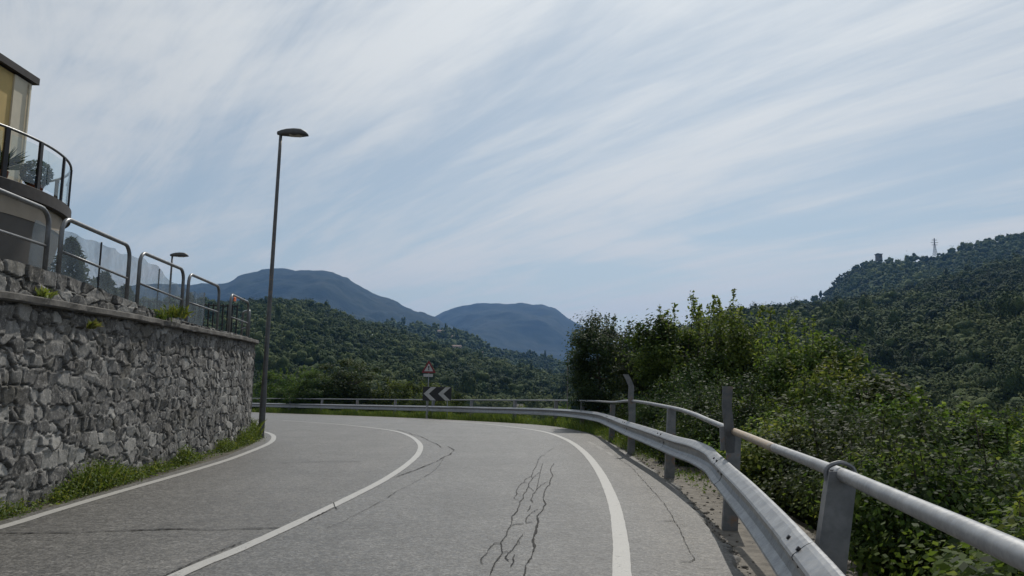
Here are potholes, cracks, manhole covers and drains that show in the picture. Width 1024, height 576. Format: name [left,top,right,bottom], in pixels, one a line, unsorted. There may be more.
crack [480,448,554,576]
crack [616,456,695,562]
